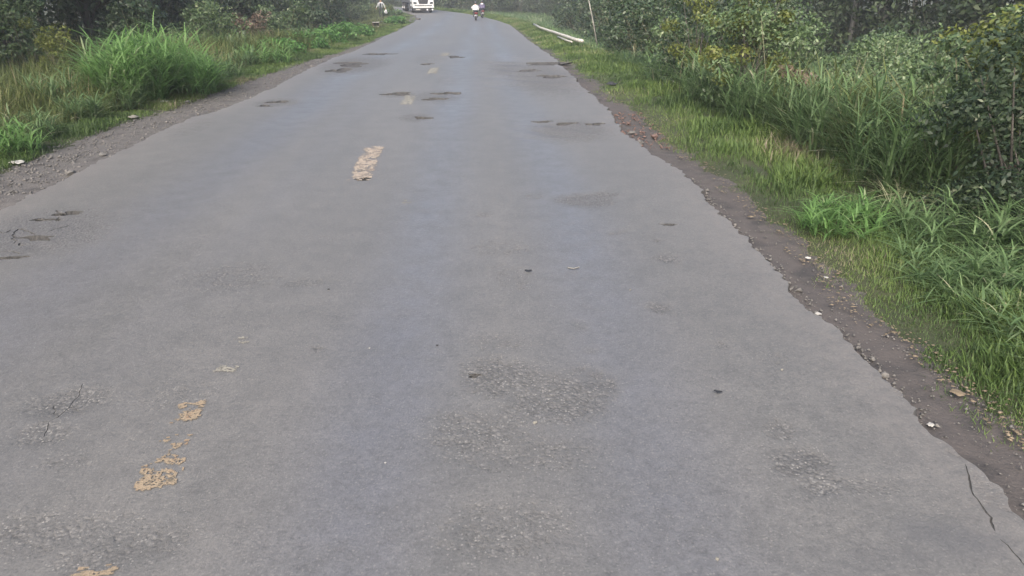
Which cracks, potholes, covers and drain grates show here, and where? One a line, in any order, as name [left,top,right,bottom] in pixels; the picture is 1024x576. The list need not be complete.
crack [965,464,1024,565]
crack [41,385,82,436]
